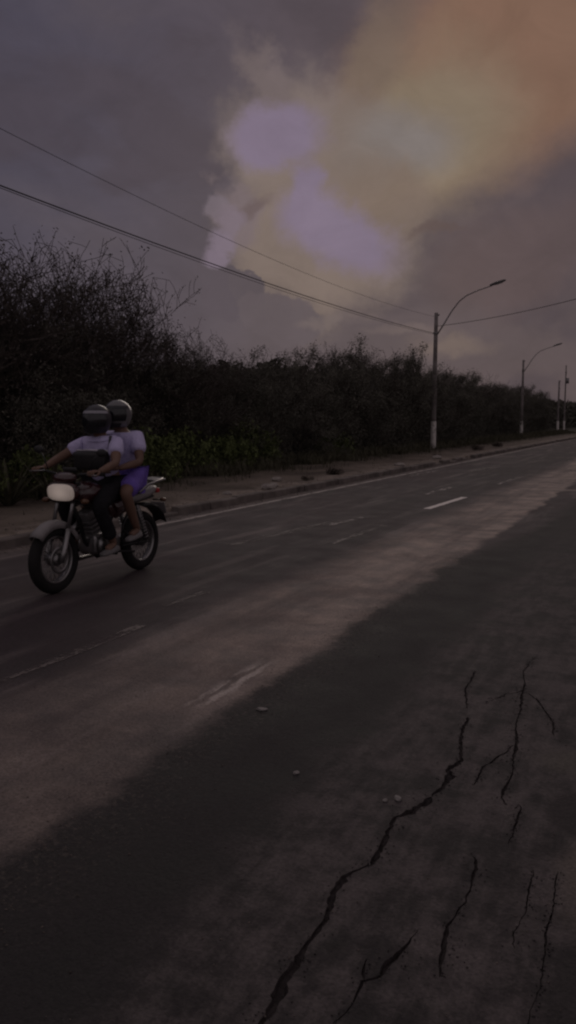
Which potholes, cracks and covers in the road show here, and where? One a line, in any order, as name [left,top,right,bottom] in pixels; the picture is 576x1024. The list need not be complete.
crack [242,658,562,1024]
